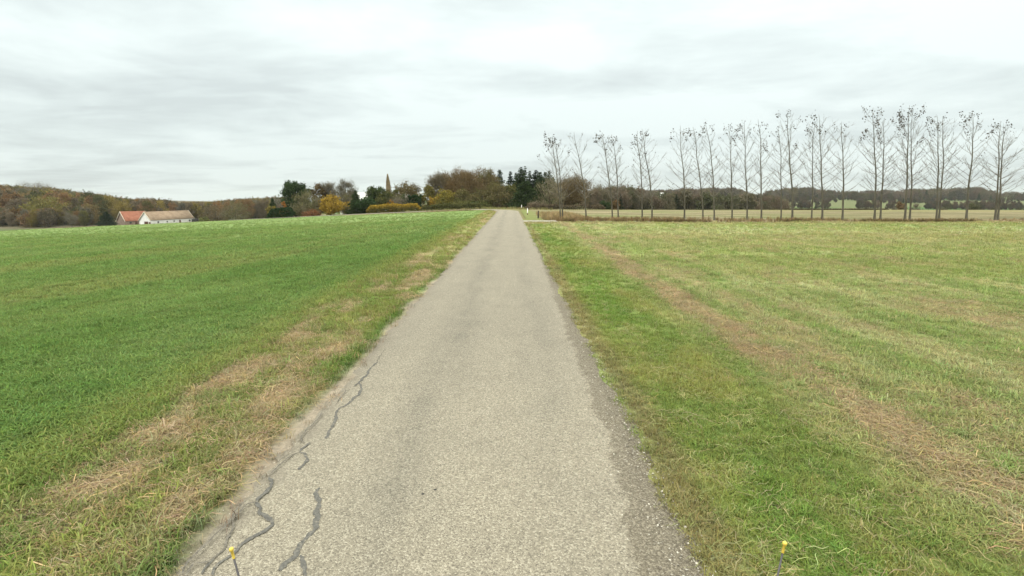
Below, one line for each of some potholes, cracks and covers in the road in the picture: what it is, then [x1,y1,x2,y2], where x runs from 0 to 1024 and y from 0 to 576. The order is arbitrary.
crack [299,389,346,442]
